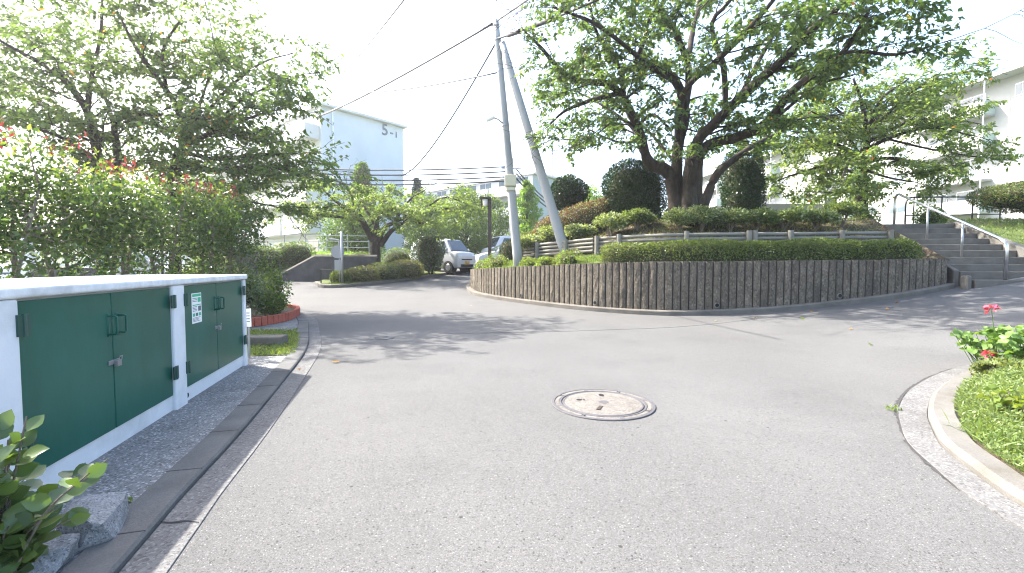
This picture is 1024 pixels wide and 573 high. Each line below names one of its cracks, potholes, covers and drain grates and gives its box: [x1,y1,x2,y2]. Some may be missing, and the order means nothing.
manhole cover [551,389,656,421]
